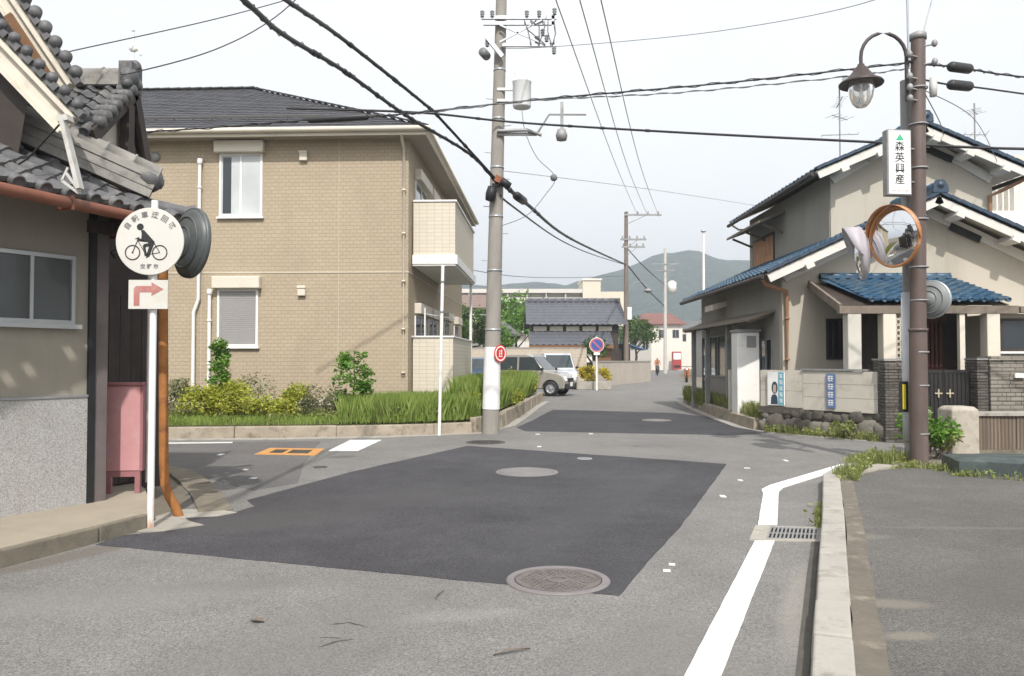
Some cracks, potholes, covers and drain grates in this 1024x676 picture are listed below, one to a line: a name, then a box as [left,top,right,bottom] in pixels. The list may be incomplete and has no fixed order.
manhole cover [496,467,558,477]
drain grate [749,525,821,543]
manhole cover [506,566,611,596]
